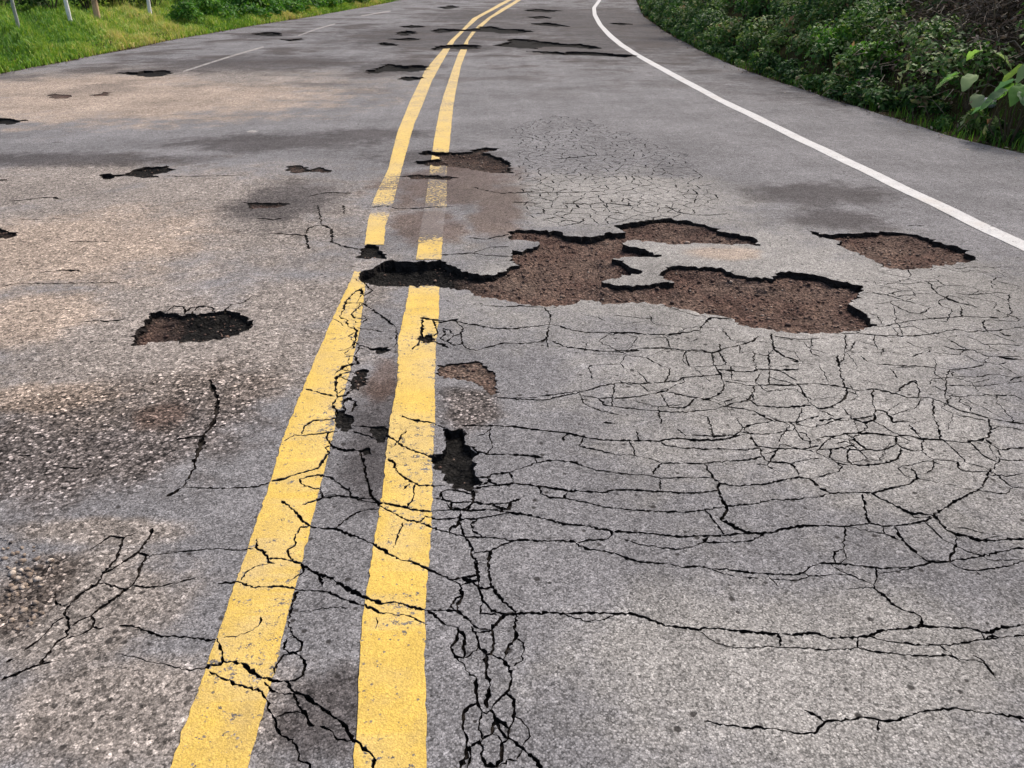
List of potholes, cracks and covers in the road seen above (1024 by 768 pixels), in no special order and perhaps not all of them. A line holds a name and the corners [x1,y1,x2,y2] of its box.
pothole [130,310,255,346]
crack [372,117,720,257]
pothole [435,361,499,395]
crack [257,192,365,251]
pothole [810,231,976,270]
pothole [493,38,602,49]
crack [1,225,1024,768]
pothole [364,64,429,74]
pothole [359,218,877,334]
